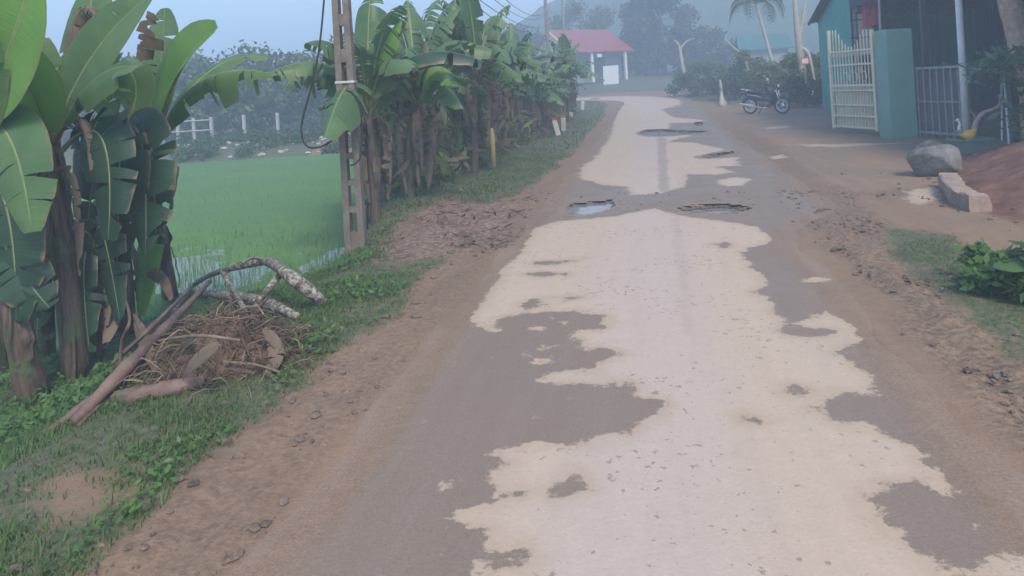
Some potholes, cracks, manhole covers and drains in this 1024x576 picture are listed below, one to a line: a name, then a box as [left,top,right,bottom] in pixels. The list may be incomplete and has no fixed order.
pothole [662,201,763,216]
pothole [634,129,712,137]
pothole [694,150,741,159]
pothole [549,197,627,218]
